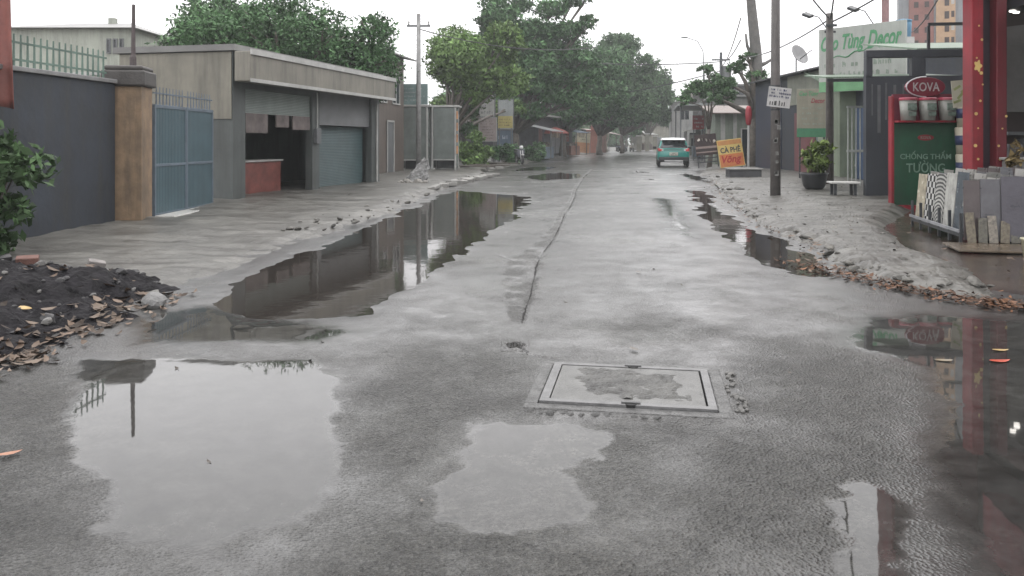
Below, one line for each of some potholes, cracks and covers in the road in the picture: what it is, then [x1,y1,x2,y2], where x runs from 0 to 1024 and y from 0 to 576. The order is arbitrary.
pothole [501,341,529,353]
manhole cover [522,360,749,419]
crack [503,173,589,321]
